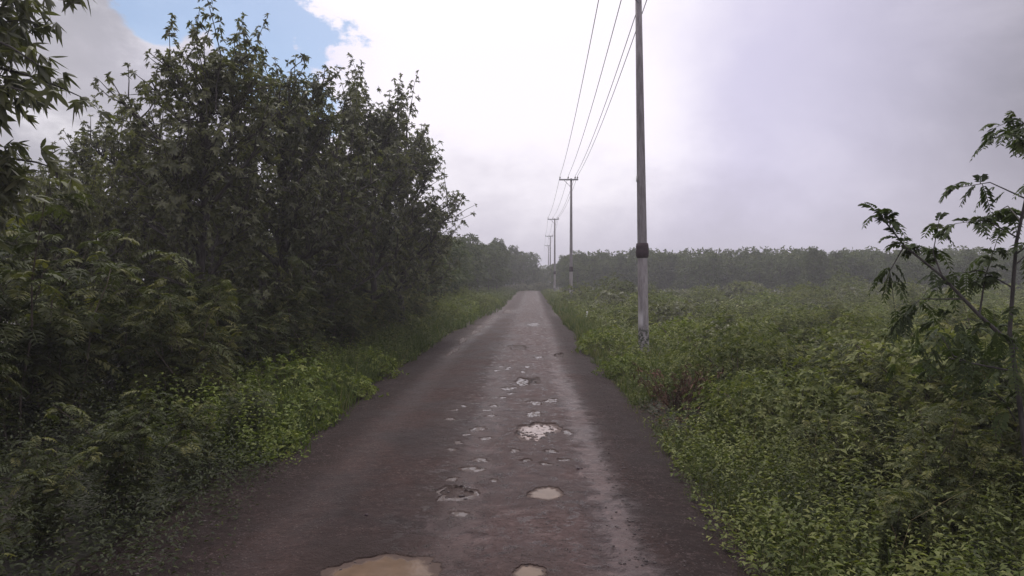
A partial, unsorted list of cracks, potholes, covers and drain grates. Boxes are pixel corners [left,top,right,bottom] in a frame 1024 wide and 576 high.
pothole [526,485,566,501]
pothole [514,421,563,442]
pothole [511,563,547,576]
pothole [514,377,541,387]
pothole [434,484,481,501]
pothole [318,552,446,576]
